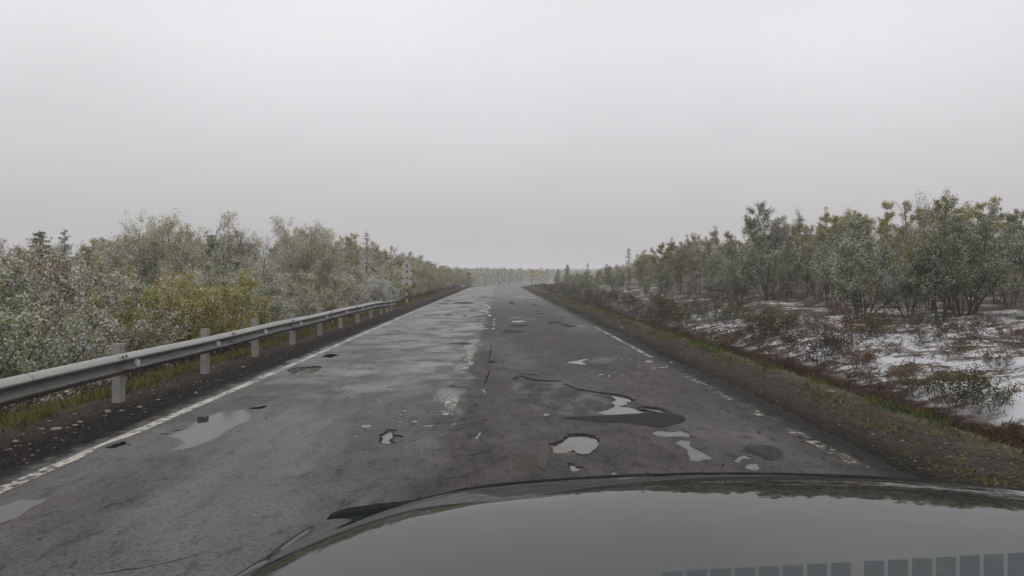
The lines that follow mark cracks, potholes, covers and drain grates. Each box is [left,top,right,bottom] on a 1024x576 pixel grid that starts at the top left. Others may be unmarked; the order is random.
pothole [548,433,601,455]
pothole [379,429,404,445]
pothole [509,375,671,416]
pothole [287,366,322,375]
